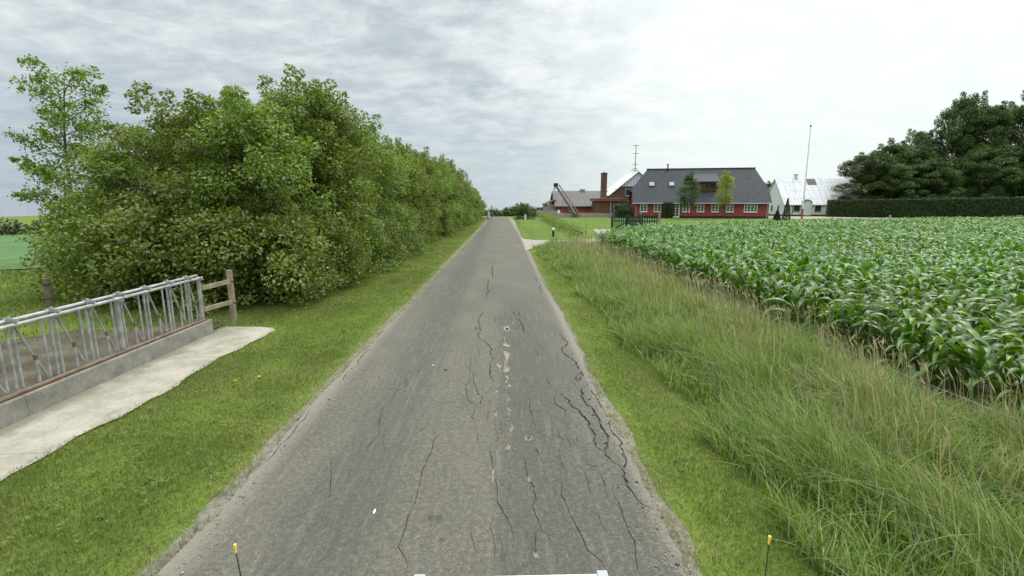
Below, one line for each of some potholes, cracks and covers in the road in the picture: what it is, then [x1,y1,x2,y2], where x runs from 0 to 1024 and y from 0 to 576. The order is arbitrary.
crack [522,449,551,548]
crack [398,432,443,574]
crack [465,265,539,558]
crack [528,333,652,573]
crack [260,371,419,507]
